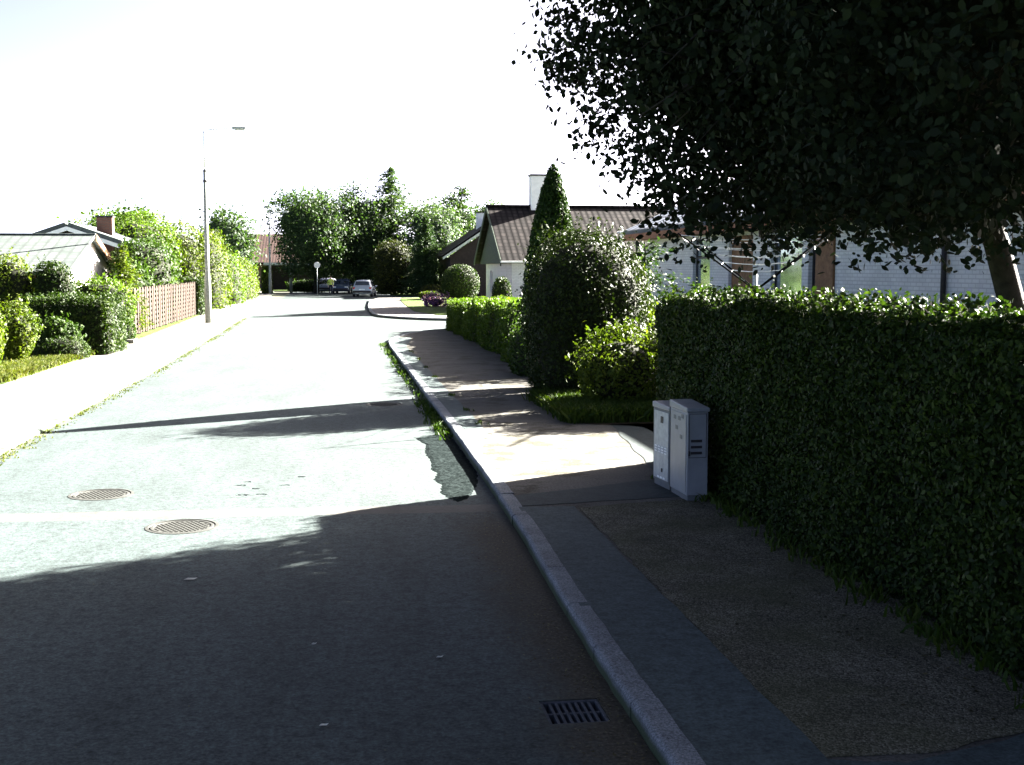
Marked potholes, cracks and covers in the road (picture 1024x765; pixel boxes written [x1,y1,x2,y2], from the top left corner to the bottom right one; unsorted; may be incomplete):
drain grate [539,699,609,725]
manhole cover [68,488,134,501]
manhole cover [145,519,219,534]
